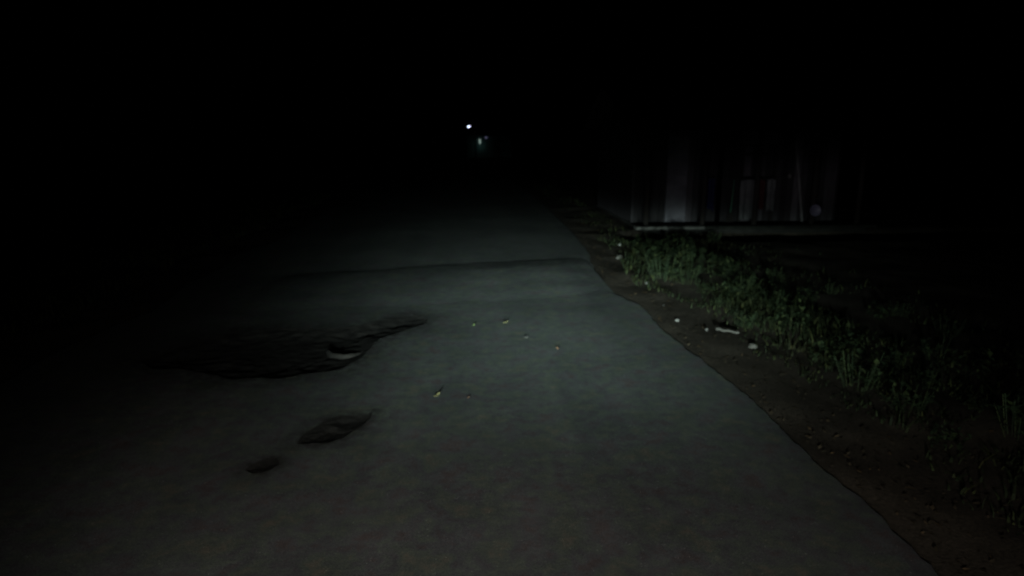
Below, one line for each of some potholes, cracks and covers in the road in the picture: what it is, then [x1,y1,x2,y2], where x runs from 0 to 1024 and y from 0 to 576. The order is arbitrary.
pothole [138,314,428,379]
pothole [298,411,373,444]
pothole [245,457,280,474]
